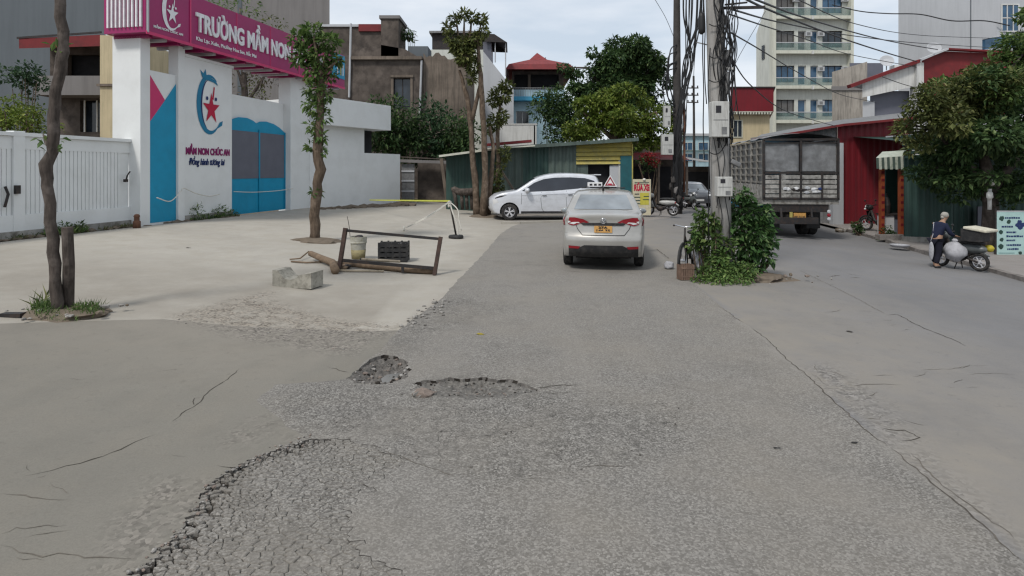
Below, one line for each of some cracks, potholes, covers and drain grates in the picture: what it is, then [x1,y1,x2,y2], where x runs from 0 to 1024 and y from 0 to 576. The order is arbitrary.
pothole [346,355,412,385]
crack [814,365,1004,398]
crack [868,416,1014,538]
crack [8,434,455,576]
pothole [413,377,540,401]
